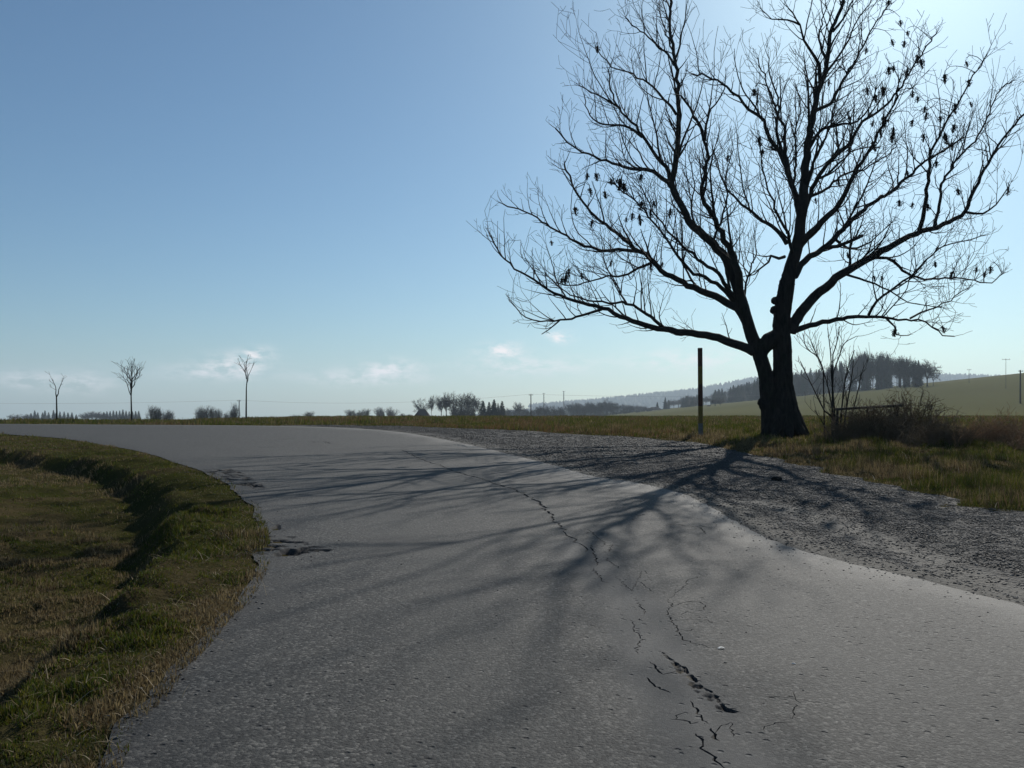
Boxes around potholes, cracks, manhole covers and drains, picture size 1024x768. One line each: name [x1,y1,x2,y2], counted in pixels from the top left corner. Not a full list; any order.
crack [405,451,712,693]
pothole [255,524,333,557]
crack [763,689,827,730]
pothole [199,469,265,490]
crack [670,701,735,768]
